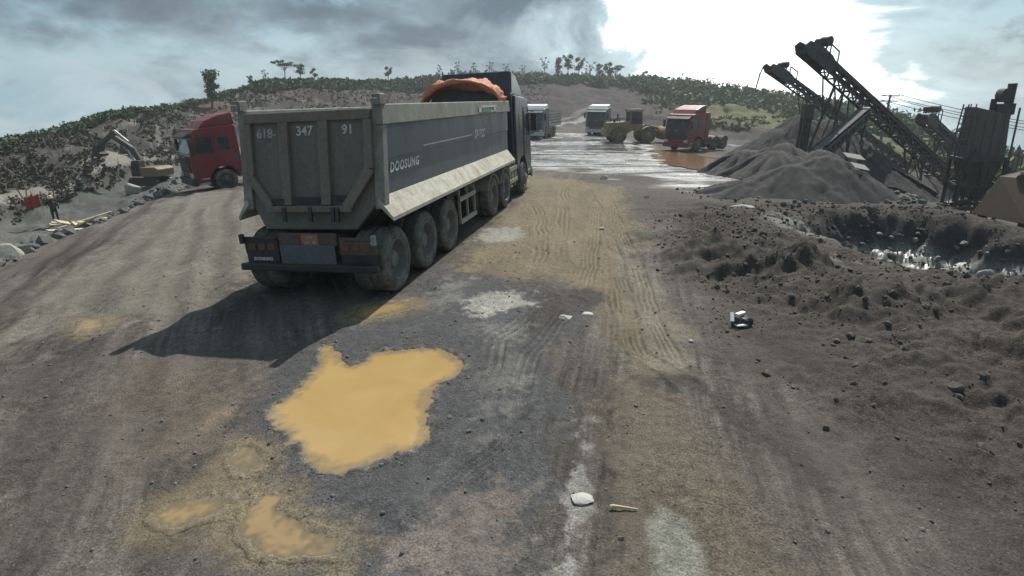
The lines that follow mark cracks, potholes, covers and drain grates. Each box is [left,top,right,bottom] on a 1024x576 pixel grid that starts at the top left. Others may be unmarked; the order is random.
pothole [231,486,352,566]
pothole [257,342,473,481]
pothole [141,484,257,538]
pothole [222,441,273,481]
